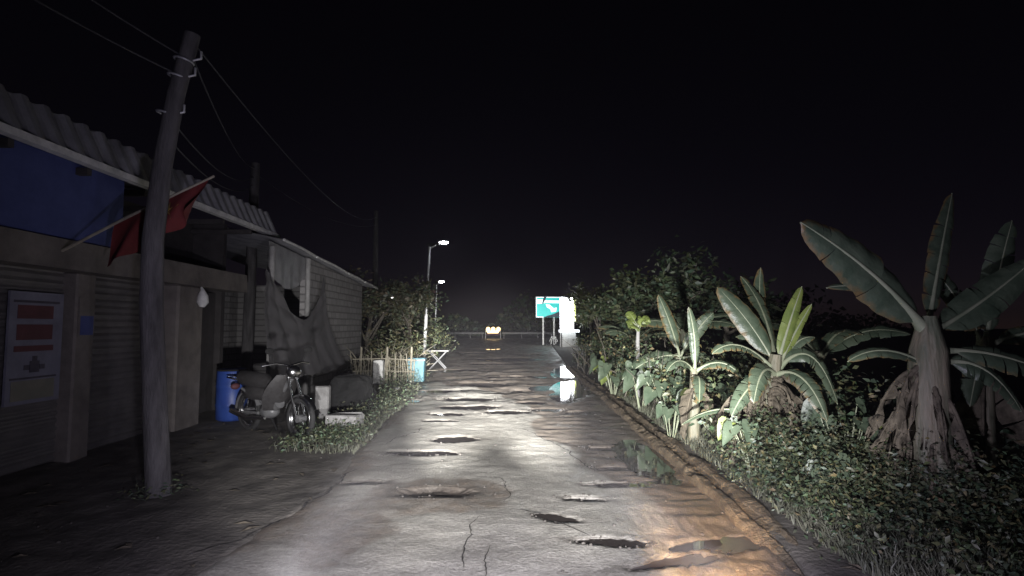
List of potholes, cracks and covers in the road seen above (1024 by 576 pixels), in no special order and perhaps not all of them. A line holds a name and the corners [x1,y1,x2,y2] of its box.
pothole [391,486,482,498]
pothole [571,537,651,548]
crack [462,515,490,575]
pothole [532,513,582,523]
